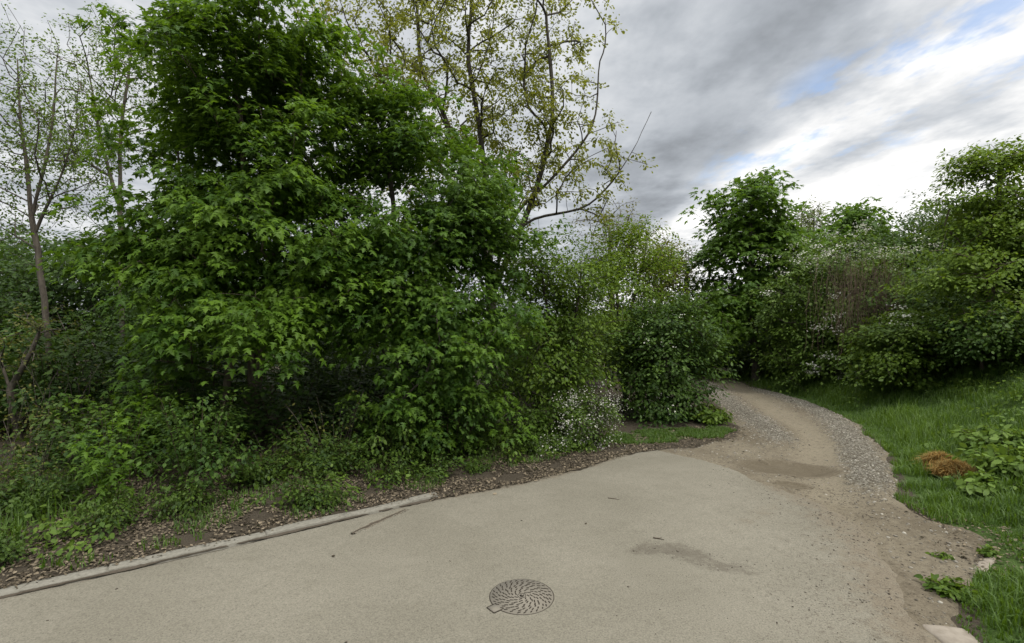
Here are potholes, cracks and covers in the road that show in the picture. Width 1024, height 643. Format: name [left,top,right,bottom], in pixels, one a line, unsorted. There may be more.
manhole cover [486,579,554,615]
